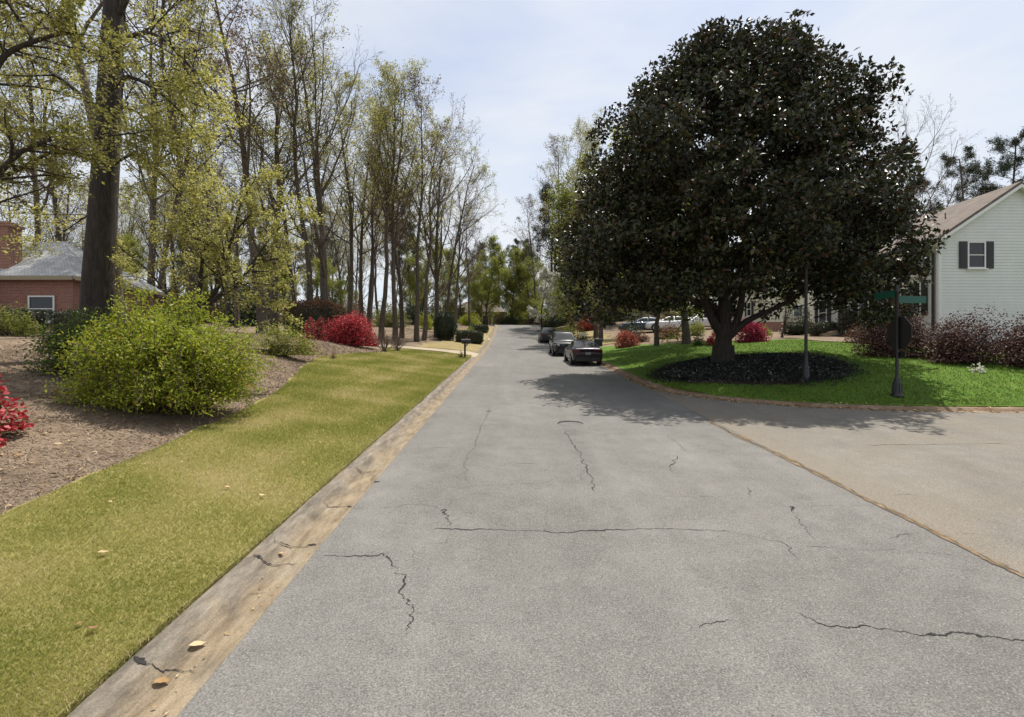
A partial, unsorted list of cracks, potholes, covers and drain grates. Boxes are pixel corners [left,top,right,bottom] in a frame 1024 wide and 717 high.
crack [133,655,192,673]
crack [716,424,1021,573]
crack [272,537,414,634]
crack [796,612,1023,641]
crack [382,408,795,556]
